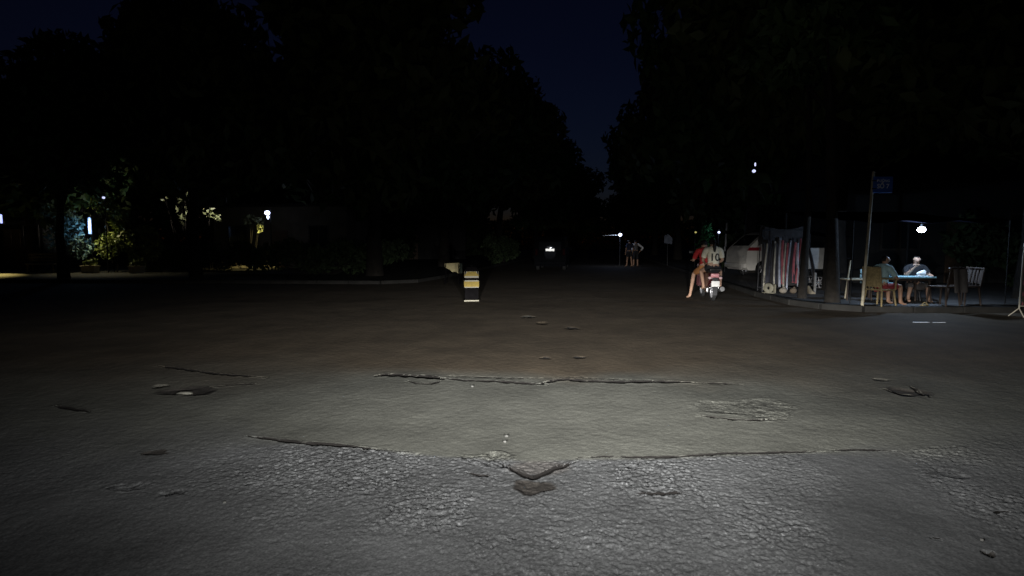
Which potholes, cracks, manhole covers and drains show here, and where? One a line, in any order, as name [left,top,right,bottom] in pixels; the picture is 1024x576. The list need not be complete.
pothole [153,386,220,396]
pothole [884,387,935,398]
crack [153,365,268,388]
crack [244,434,379,452]
crack [375,373,744,386]
pothole [511,479,559,497]
crack [466,449,897,481]
